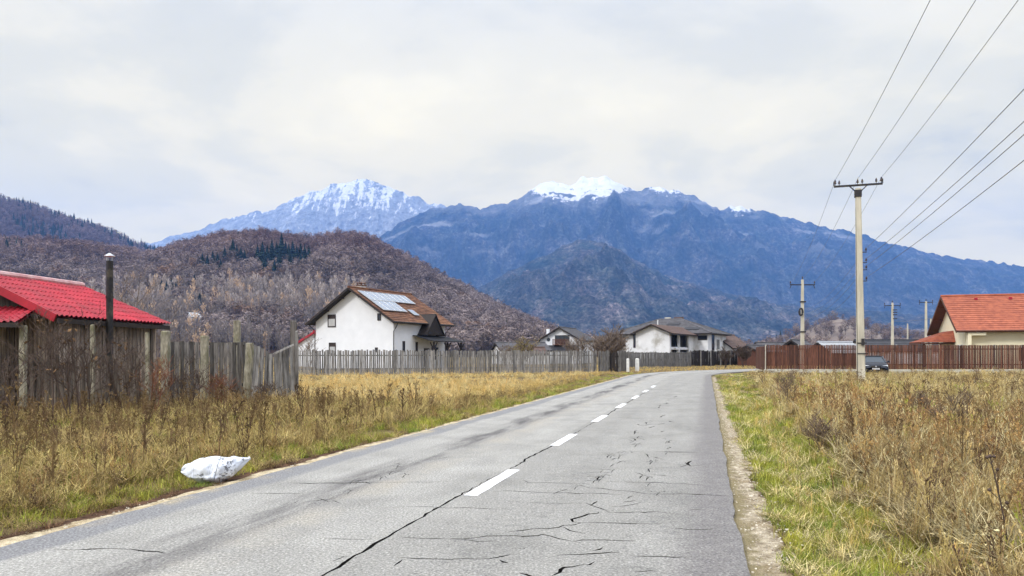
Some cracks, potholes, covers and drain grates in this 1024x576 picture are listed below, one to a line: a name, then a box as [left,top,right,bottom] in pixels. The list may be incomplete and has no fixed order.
crack [394,396,725,576]
crack [270,457,446,505]
